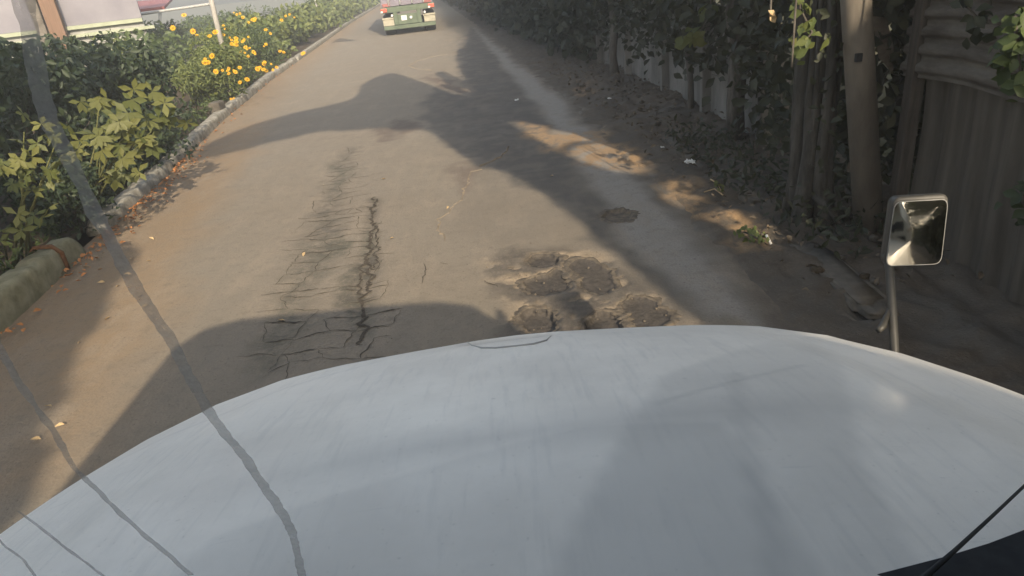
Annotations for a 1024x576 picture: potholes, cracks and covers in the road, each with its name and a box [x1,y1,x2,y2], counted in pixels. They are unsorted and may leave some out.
pothole [562,256,623,295]
pothole [580,308,635,330]
pothole [508,305,561,334]
pothole [596,207,641,224]
pothole [524,252,569,267]
pothole [515,267,584,297]
crack [238,148,401,379]
crack [436,146,509,241]
pothole [611,294,682,328]
